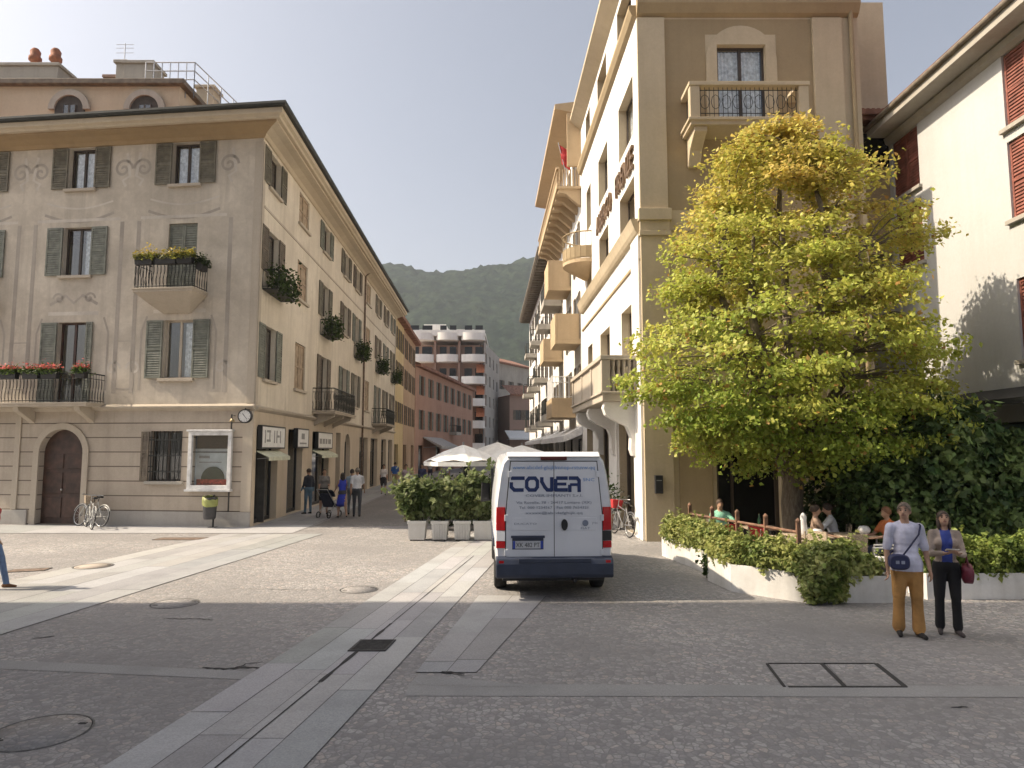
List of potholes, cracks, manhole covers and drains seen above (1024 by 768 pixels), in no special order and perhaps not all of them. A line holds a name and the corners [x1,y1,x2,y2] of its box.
crack [202,661,263,670]
drain grate [347,639,396,651]
manhole cover [149,598,200,609]
manhole cover [339,586,378,594]
manhole cover [766,663,908,687]
manhole cover [0,713,95,752]
